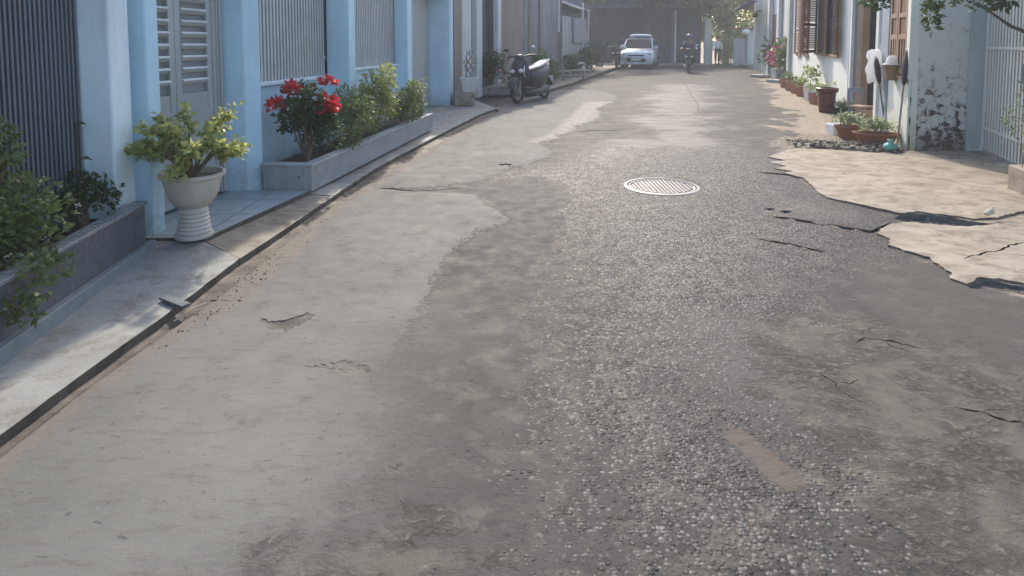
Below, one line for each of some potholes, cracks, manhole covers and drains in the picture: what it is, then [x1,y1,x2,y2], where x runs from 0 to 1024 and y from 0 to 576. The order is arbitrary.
crack [756,216,891,252]
crack [965,243,1021,259]
crack [956,407,1023,423]
pothole [259,312,316,333]
manhole cover [624,177,701,196]
crack [857,328,921,353]
